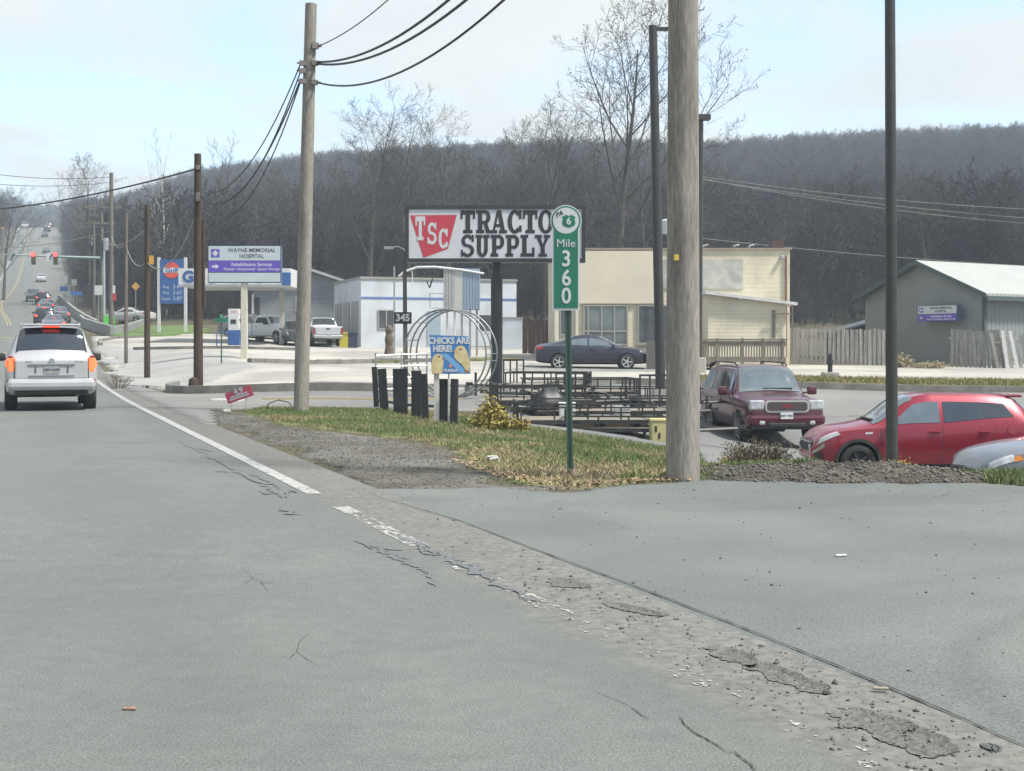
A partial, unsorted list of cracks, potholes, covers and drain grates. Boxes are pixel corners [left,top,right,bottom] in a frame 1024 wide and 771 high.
crack [180,441,302,515]
pothole [703,646,757,666]
crack [355,535,540,602]
pothole [827,707,960,759]
crack [679,715,756,771]
pothole [737,659,831,695]
pothole [602,602,679,619]
